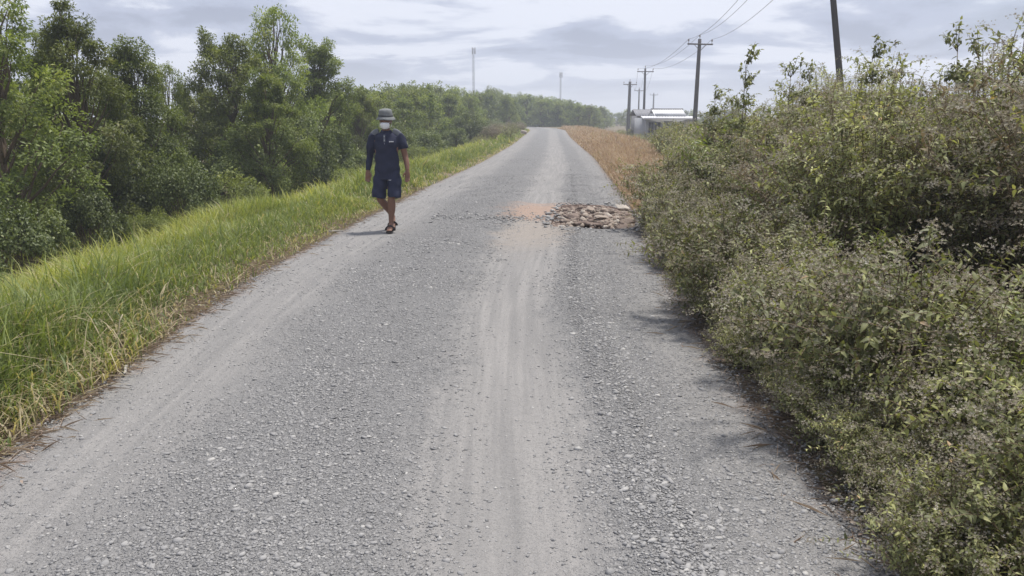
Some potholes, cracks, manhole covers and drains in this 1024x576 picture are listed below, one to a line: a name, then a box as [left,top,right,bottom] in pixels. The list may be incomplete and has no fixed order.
pothole [551,204,638,229]
